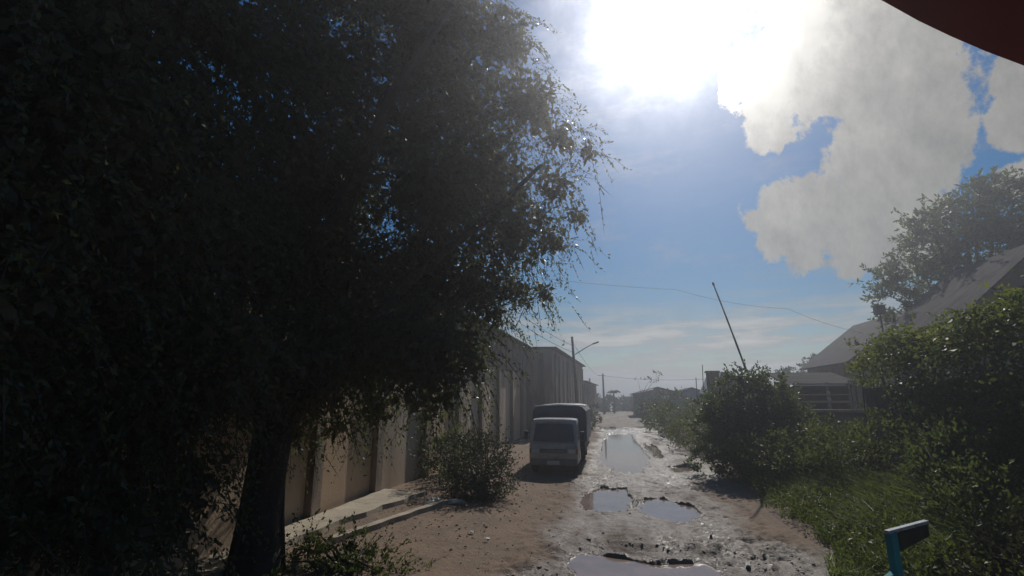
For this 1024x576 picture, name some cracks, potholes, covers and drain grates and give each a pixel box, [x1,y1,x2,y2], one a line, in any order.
pothole [641,442,665,460]
pothole [576,484,644,515]
pothole [560,548,728,576]
pothole [593,431,655,491]
pothole [626,496,705,525]
